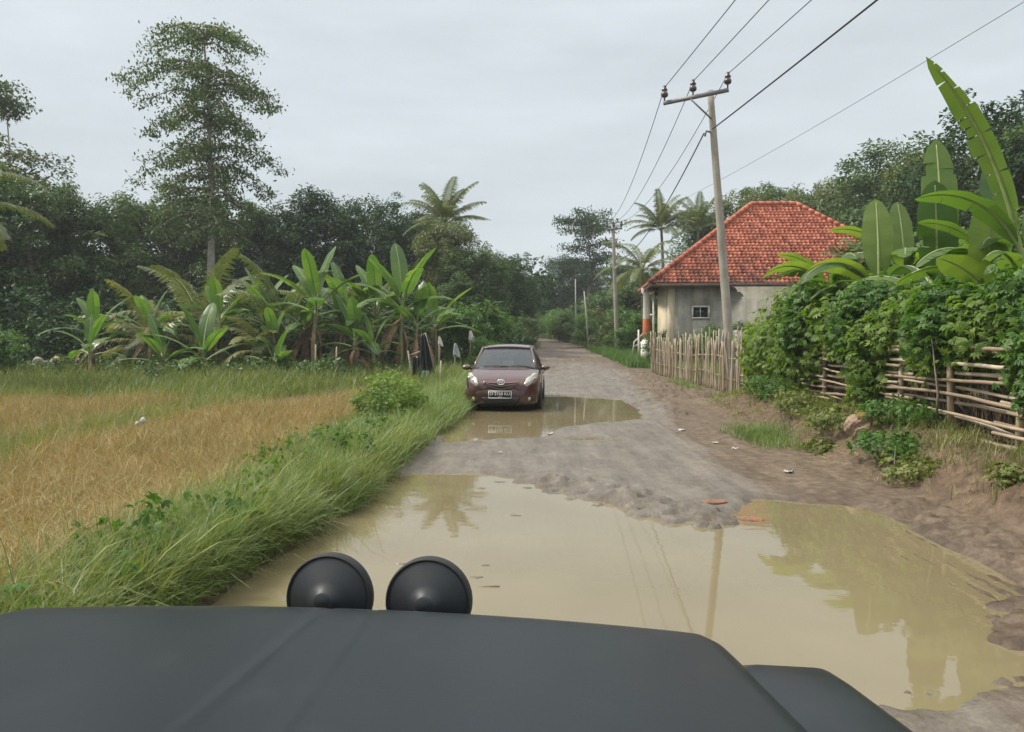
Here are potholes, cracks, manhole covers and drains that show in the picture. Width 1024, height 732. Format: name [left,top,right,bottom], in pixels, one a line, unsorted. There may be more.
pothole [432,394,654,443]
pothole [181,467,1024,729]
